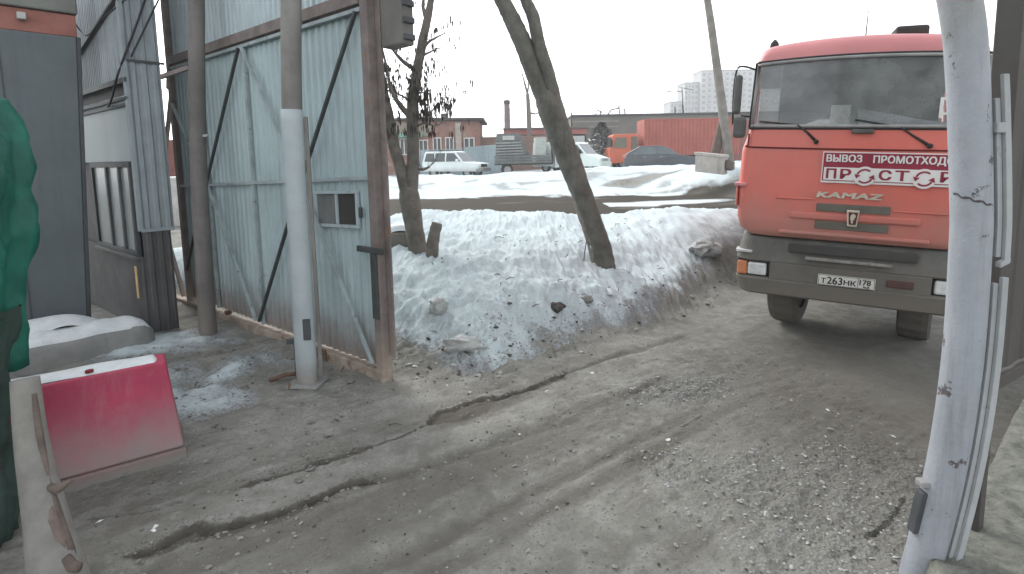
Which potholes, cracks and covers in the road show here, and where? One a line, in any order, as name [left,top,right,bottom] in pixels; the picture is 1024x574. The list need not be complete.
crack [864,496,909,539]
crack [376,423,428,446]
